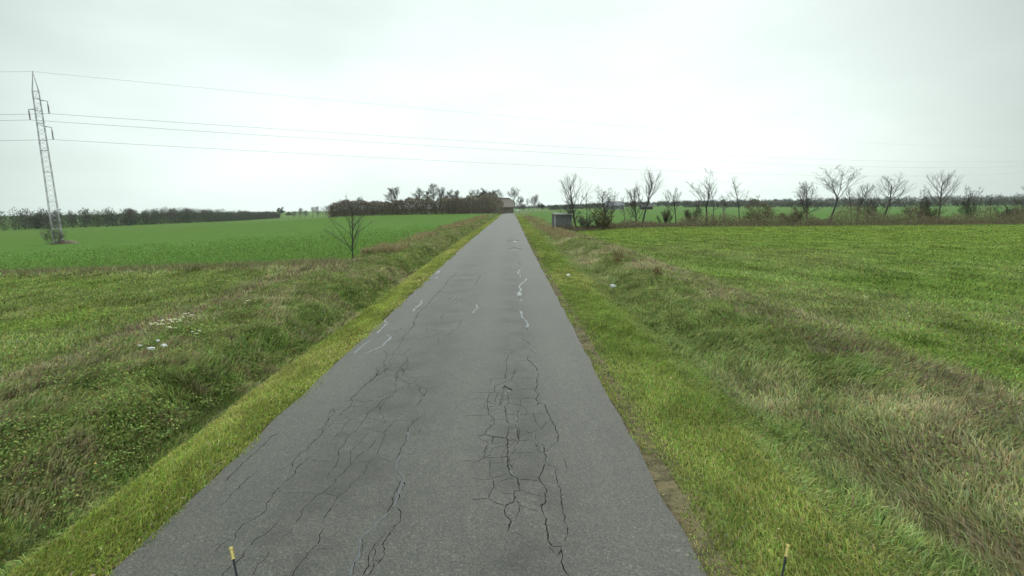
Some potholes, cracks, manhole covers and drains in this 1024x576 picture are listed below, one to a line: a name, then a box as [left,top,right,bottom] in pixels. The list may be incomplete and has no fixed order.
crack [461,354,569,576]
crack [214,275,459,576]
